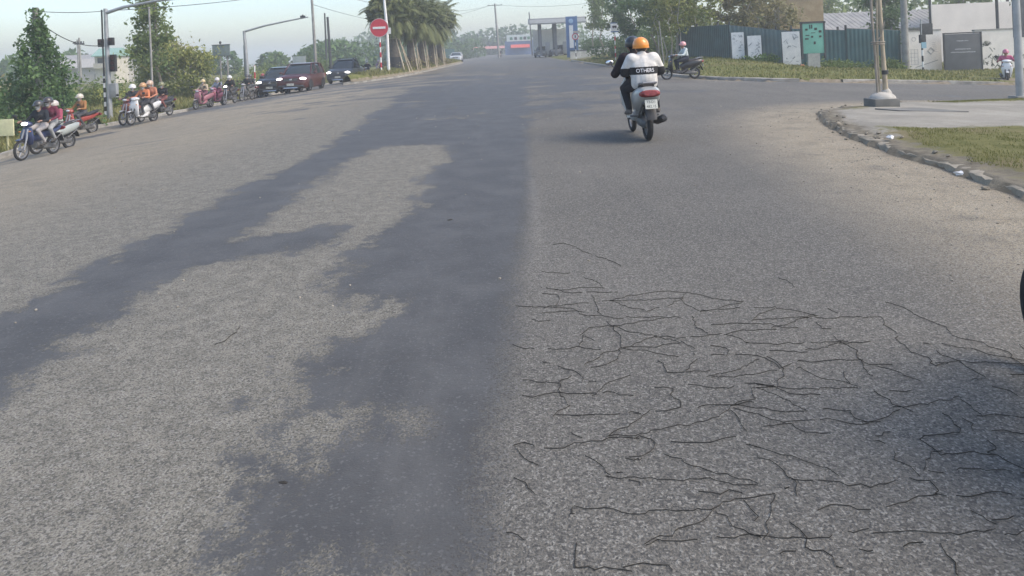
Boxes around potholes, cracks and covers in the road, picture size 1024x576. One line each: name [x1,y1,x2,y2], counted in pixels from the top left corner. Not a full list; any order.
crack [512,243,1024,576]
